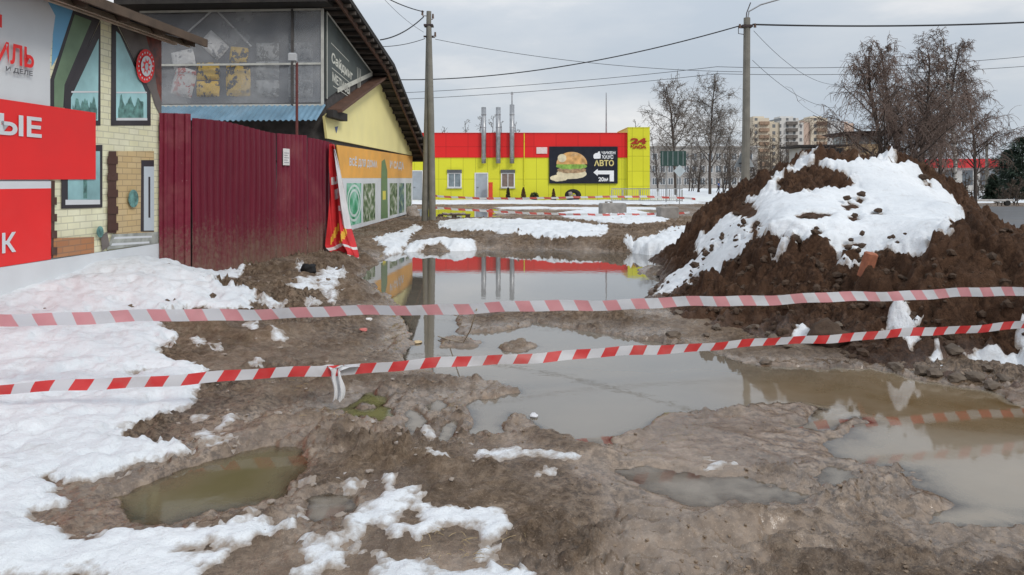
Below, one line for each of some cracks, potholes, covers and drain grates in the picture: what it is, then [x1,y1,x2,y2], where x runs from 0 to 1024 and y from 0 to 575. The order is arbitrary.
pothole [606,456,832,517]
pothole [292,480,367,523]
pothole [95,436,318,526]
